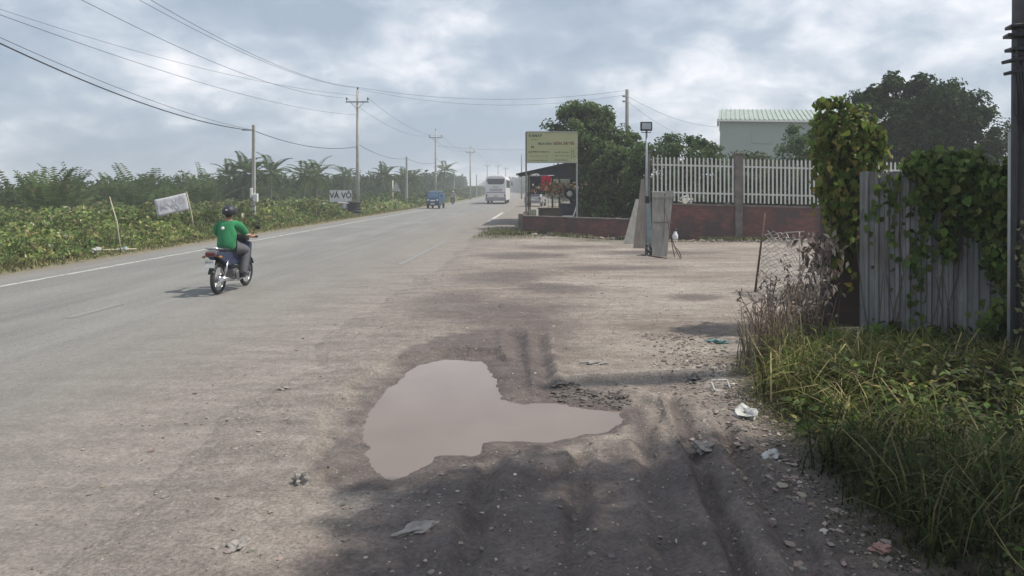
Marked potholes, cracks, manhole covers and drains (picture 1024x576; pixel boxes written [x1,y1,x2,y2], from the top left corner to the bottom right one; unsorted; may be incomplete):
pothole [308,345,666,494]
